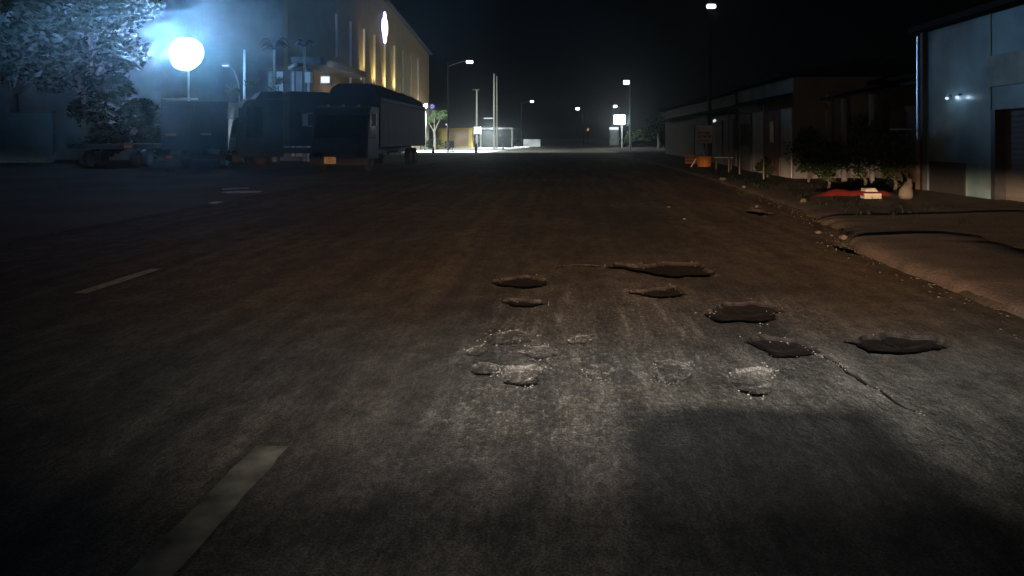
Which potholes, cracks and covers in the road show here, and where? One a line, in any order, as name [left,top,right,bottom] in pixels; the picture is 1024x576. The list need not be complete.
pothole [740,332,821,358]
pothole [726,362,787,399]
pothole [625,285,687,299]
pothole [490,363,552,389]
pothole [842,332,952,355]
pothole [501,297,549,309]
pothole [491,274,551,289]
pothole [606,261,716,279]
crack [813,351,925,416]
pothole [695,298,786,325]
